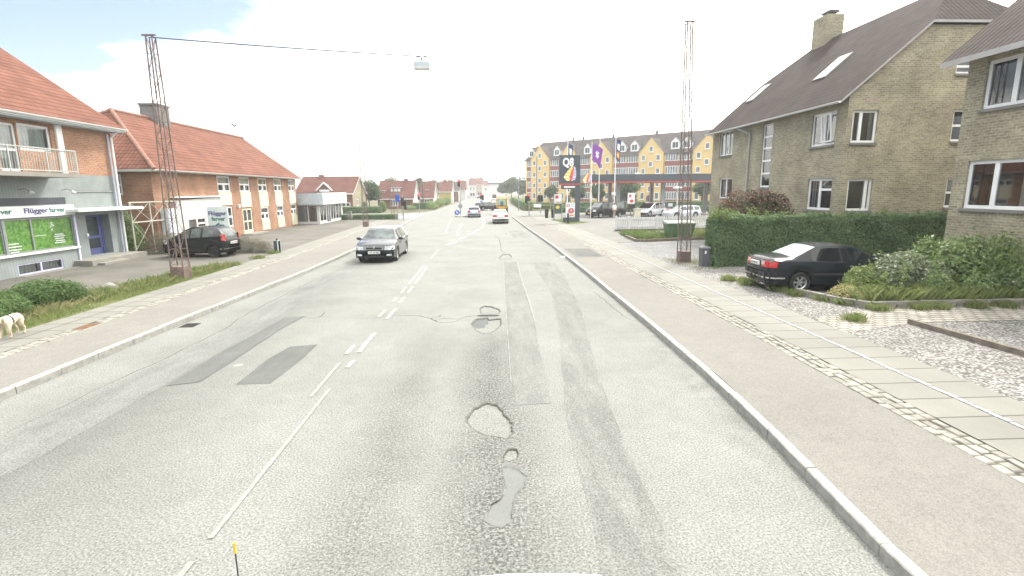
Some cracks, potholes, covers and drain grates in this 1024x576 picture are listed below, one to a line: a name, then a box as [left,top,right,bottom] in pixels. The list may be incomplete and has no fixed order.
pothole [465,401,515,439]
pothole [480,306,501,314]
pothole [503,448,519,461]
pothole [484,462,530,528]
pothole [471,317,502,334]
